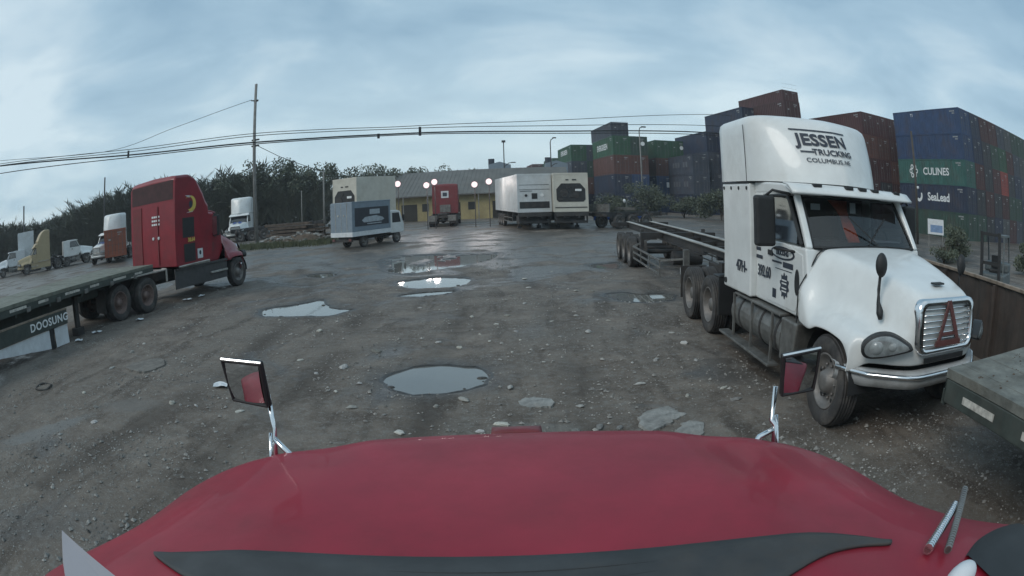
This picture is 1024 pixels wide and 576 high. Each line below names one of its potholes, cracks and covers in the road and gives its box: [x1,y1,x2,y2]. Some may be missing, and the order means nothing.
pothole [601,292,677,303]
pothole [257,299,356,317]
pothole [376,252,505,275]
pothole [392,276,475,289]
pothole [379,364,494,396]
